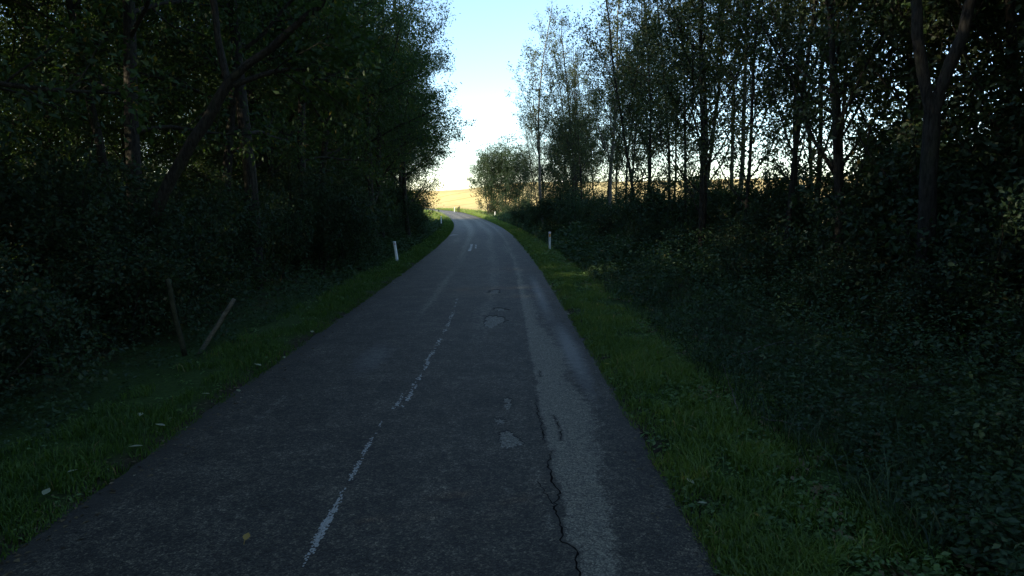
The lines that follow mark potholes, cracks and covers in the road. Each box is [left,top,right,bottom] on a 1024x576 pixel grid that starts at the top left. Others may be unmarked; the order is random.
pothole [483,315,509,328]
crack [535,400,581,576]
pothole [498,430,525,449]
